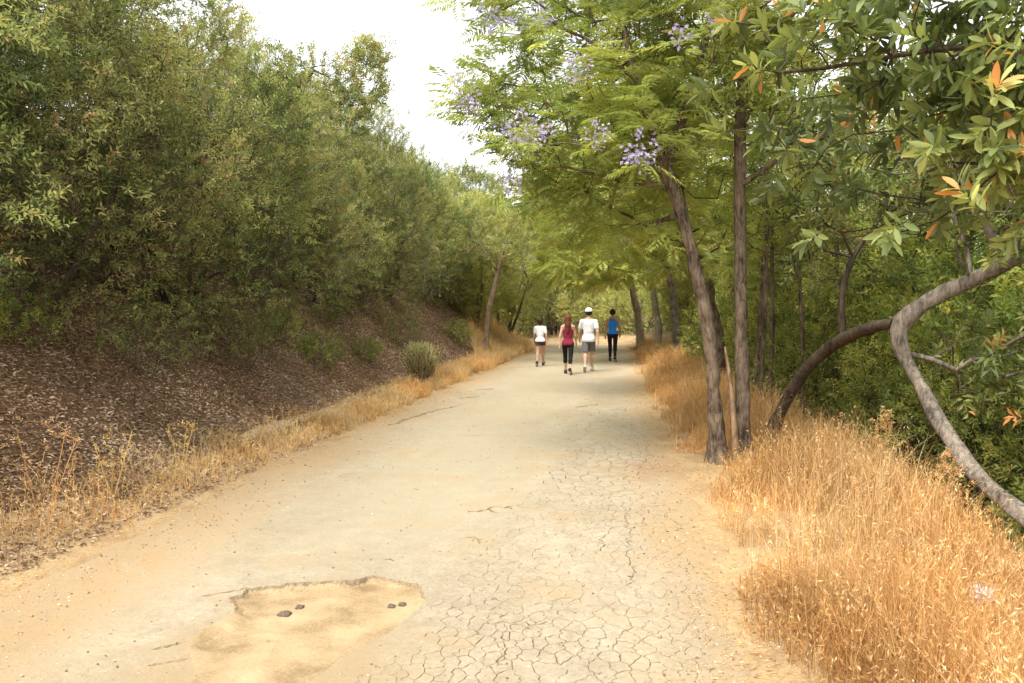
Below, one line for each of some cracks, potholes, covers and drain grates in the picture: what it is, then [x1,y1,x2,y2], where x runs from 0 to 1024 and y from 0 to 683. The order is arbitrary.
pothole [186,575,426,683]
crack [356,409,716,683]
crack [388,389,489,426]
crack [148,640,189,666]
